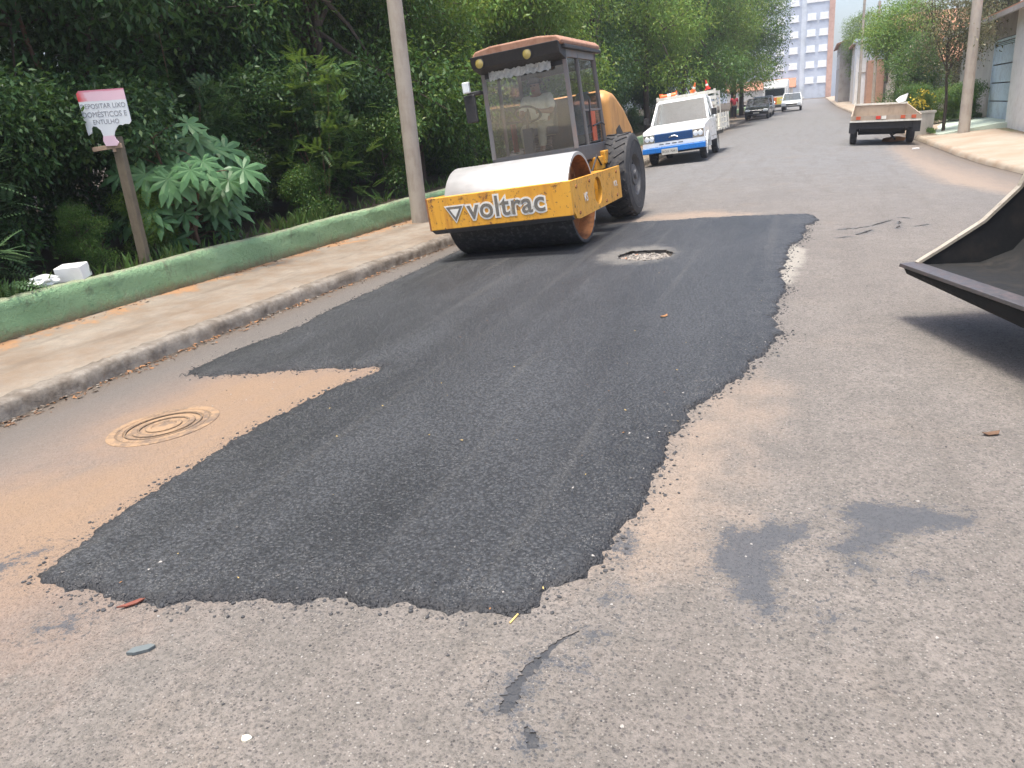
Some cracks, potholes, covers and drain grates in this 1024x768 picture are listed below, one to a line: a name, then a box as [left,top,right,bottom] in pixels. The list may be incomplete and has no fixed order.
manhole cover [105,406,220,447]
crack [838,220,929,238]
